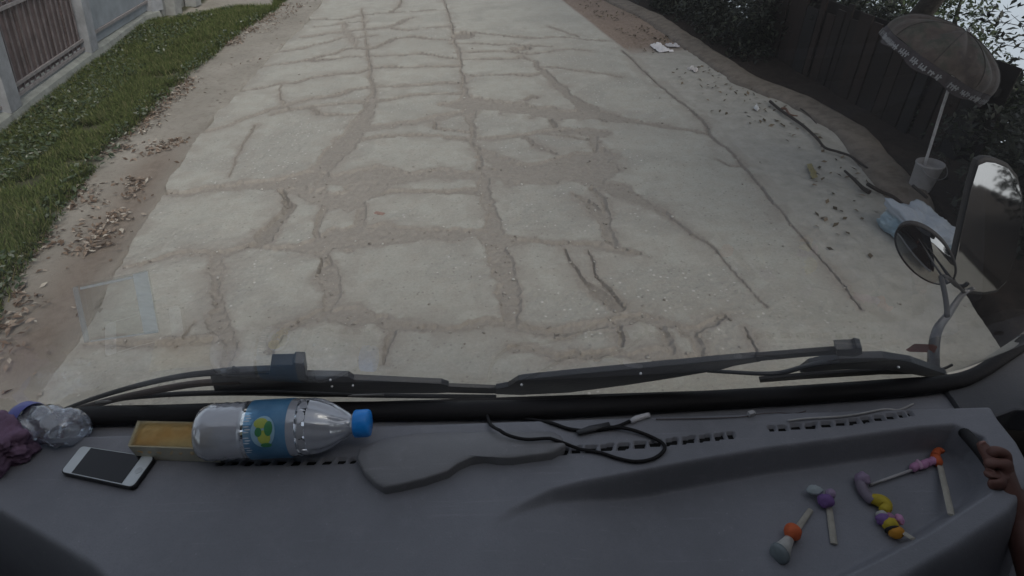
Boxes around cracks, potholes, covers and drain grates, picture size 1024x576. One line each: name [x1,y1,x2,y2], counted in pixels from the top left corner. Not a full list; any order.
crack [82,0,768,368]
